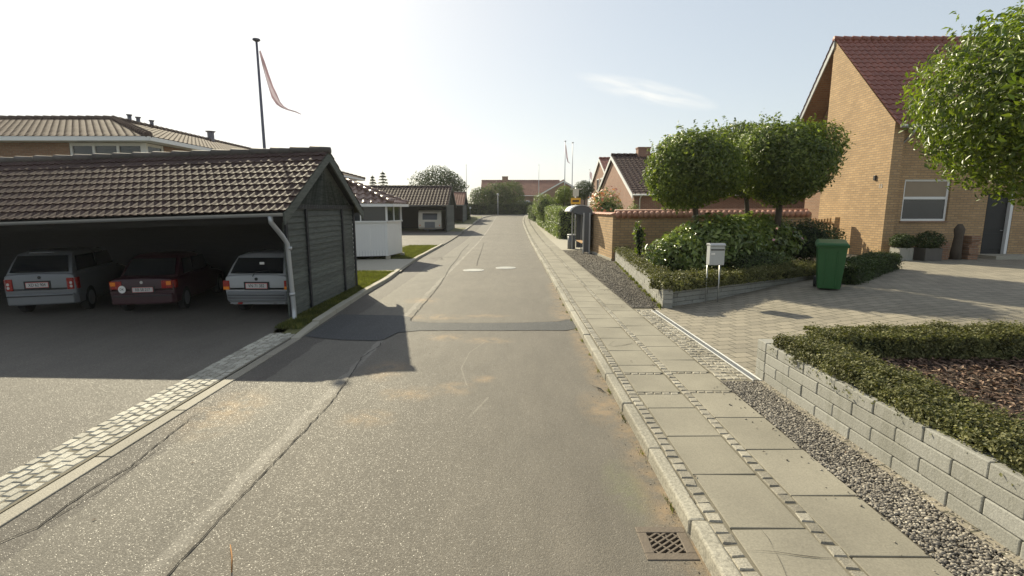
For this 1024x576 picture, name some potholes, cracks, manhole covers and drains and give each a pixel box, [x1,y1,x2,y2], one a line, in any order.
crack [167,318,571,576]
crack [1,415,195,542]
drain grate [635,527,700,561]
